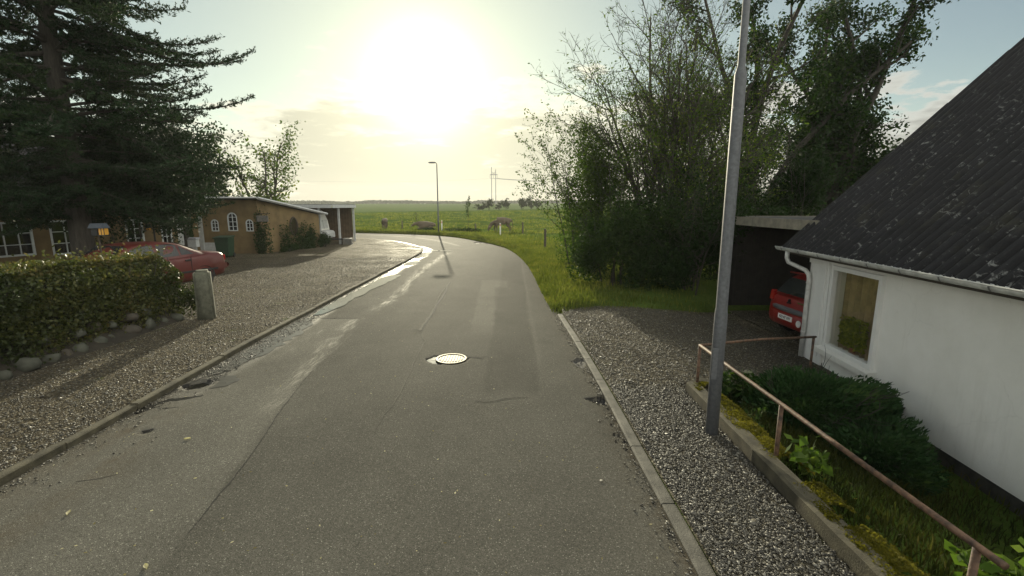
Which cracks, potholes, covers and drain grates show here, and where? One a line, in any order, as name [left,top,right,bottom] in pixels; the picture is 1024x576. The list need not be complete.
pothole [181,378,215,390]
pothole [571,357,587,369]
manhole cover [436,353,468,365]
